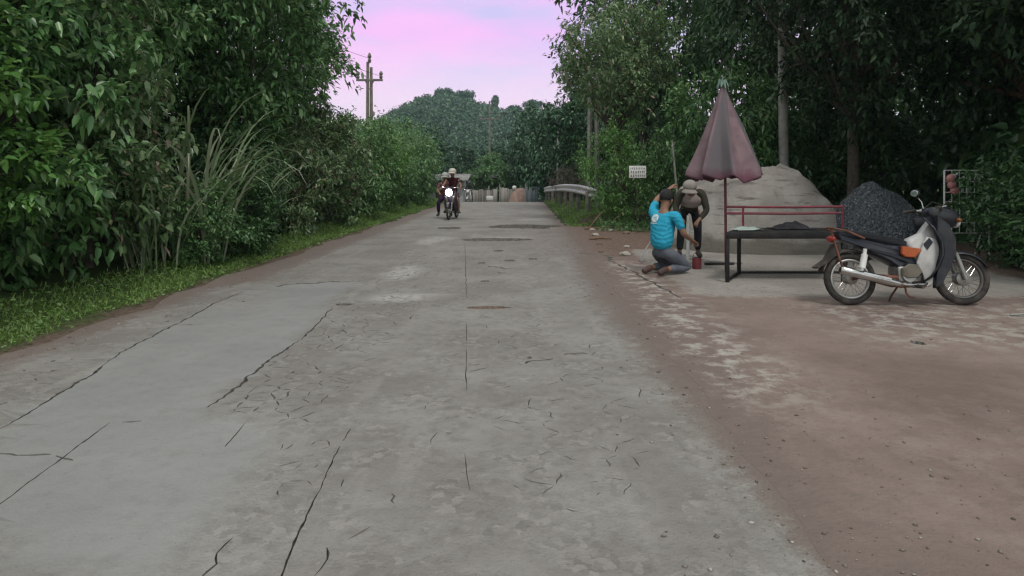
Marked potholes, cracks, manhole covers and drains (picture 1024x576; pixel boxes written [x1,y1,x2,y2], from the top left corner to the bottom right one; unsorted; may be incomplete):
crack [482,324,651,512]
crack [315,401,454,575]
crack [202,538,232,576]
crack [207,291,420,446]
crack [0,281,349,504]
